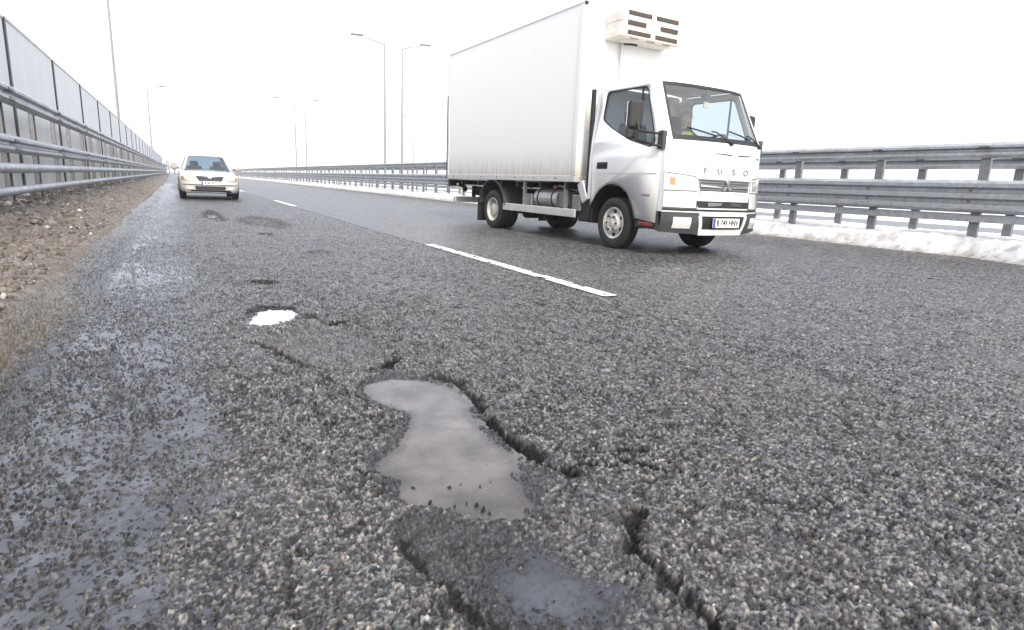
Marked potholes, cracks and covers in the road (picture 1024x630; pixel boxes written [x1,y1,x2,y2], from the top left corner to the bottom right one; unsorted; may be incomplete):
pothole [197,209,230,222]
crack [616,502,737,630]
pothole [230,215,297,230]
pothole [355,370,567,525]
crack [424,371,702,479]
pothole [382,473,707,630]
pothole [238,304,302,328]
crack [247,319,402,372]
